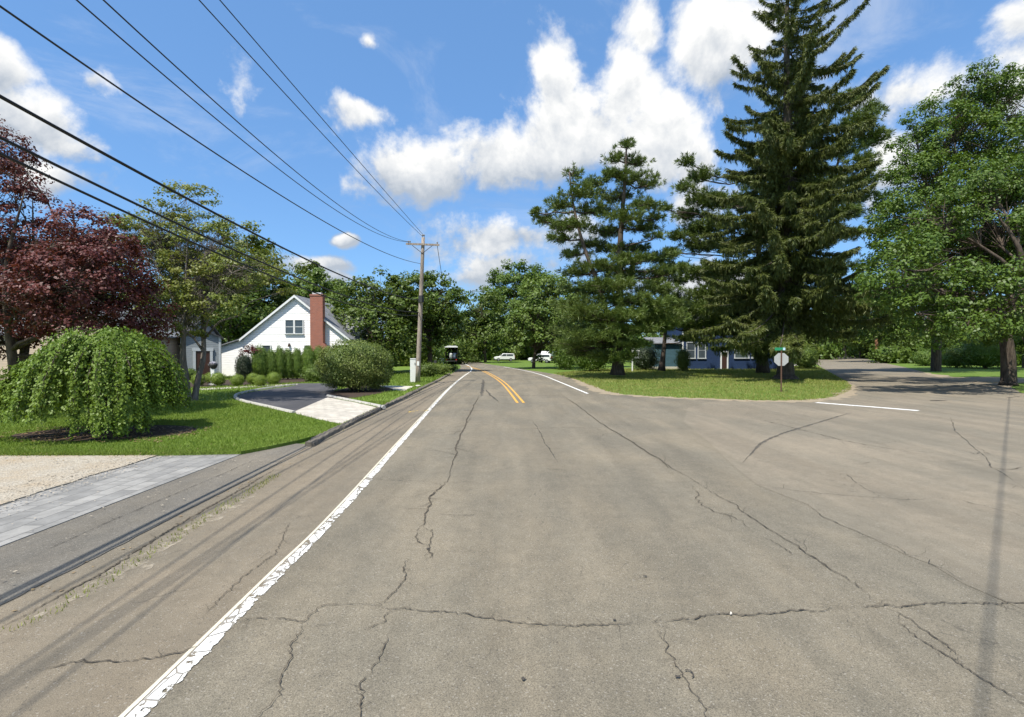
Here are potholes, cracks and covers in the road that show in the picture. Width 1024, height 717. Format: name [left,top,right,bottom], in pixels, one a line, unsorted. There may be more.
crack [382,396,481,562]
crack [950,419,1024,488]
crack [765,420,954,500]
crack [654,599,1024,717]
crack [242,562,673,717]
crack [32,635,222,671]
crack [206,524,296,614]
